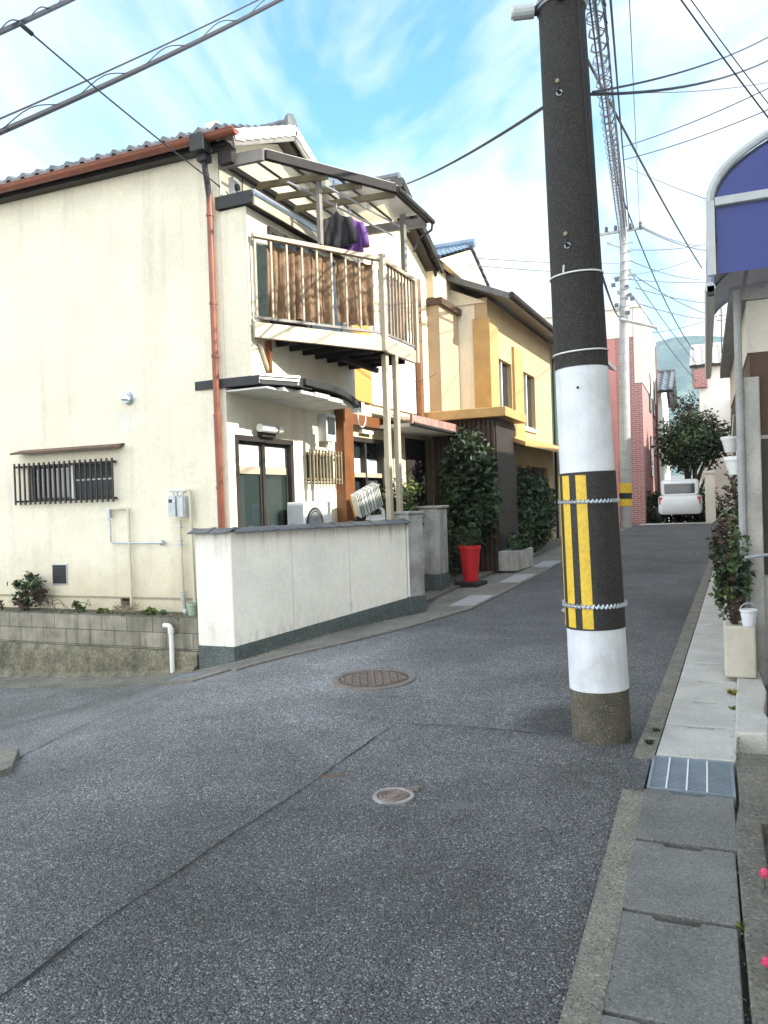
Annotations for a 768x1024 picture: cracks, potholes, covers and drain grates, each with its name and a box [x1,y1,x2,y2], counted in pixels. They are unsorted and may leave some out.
drain grate [647,755,736,807]
manhole cover [332,668,416,690]
manhole cover [372,786,420,805]
